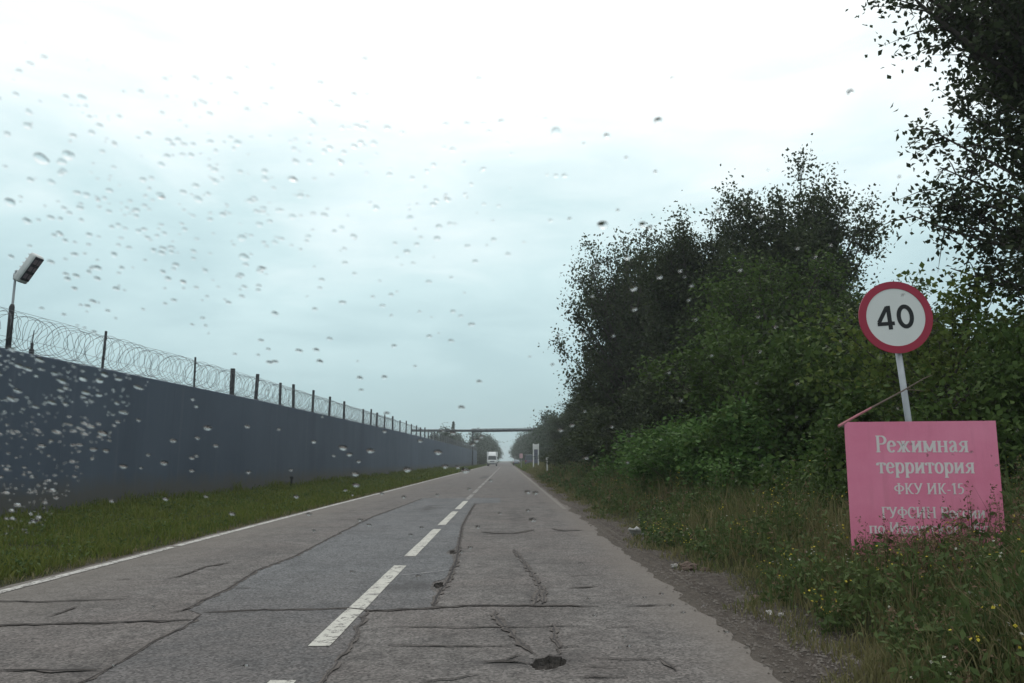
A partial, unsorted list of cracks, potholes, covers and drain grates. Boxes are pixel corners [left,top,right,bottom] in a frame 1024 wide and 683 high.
crack [0,529,667,681]
pothole [526,654,571,673]
